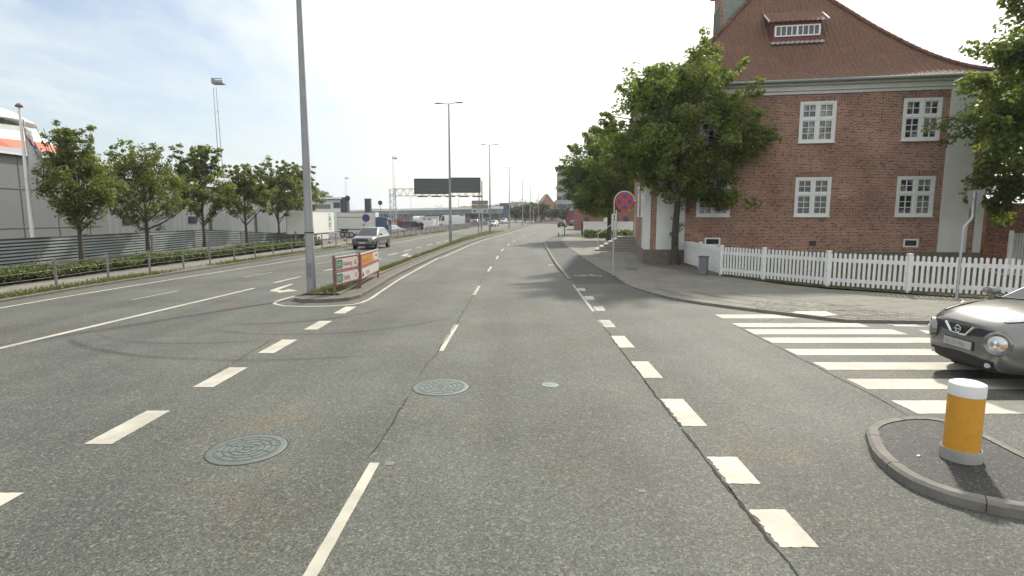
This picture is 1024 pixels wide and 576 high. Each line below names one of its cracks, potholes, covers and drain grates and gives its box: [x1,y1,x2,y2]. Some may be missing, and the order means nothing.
manhole cover [412,379,469,396]
manhole cover [204,434,289,466]
crack [370,397,408,454]
crack [421,281,481,372]
